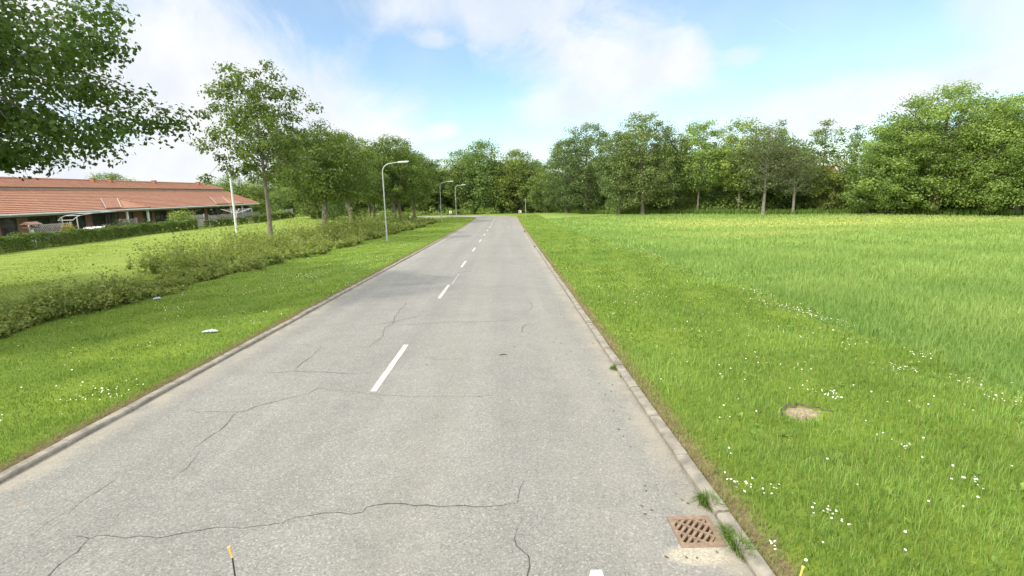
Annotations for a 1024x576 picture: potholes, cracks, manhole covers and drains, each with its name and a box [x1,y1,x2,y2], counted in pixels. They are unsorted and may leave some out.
crack [178,344,552,474]
crack [48,481,530,576]
drain grate [667,515,728,548]
